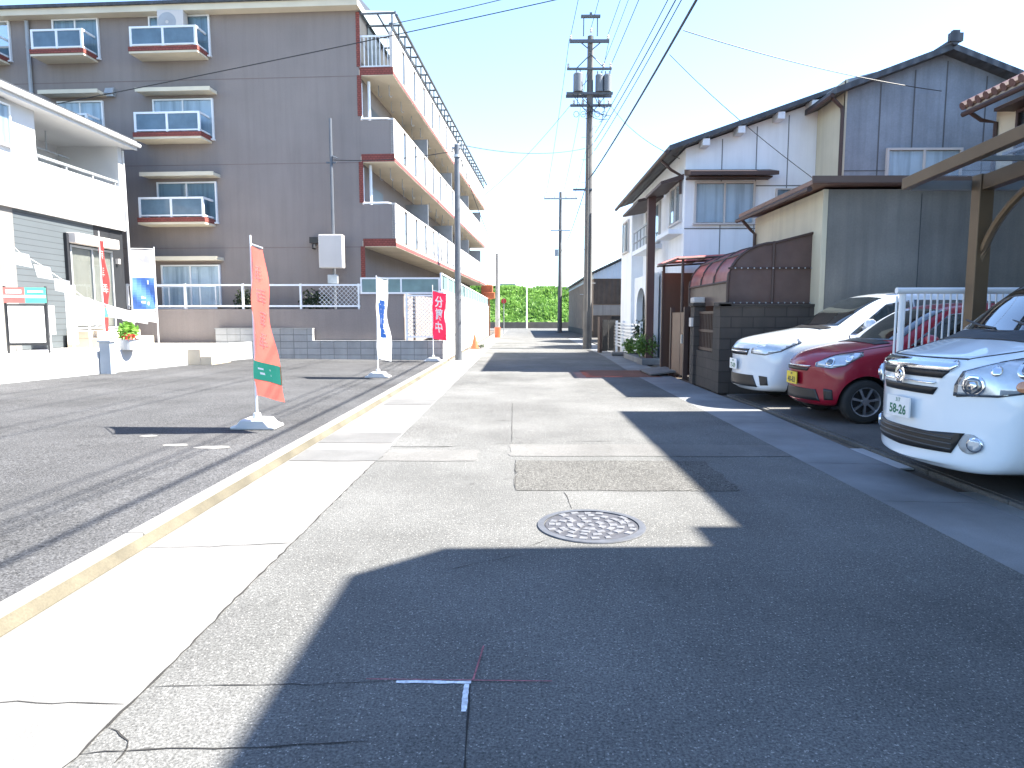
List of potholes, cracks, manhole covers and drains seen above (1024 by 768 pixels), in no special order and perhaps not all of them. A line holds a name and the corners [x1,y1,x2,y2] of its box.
manhole cover [537,509,646,544]
crack [82,727,358,762]
